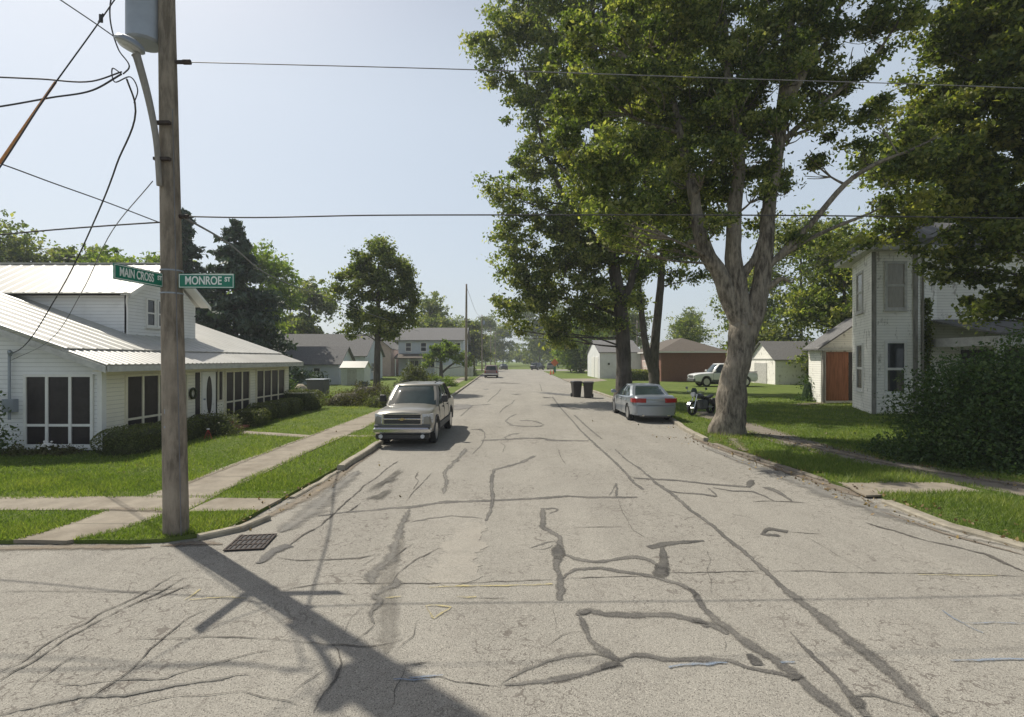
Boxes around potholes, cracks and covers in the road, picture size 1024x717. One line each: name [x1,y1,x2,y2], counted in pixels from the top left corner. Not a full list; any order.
crack [1,574,502,714]
drain grate [223,533,277,551]
